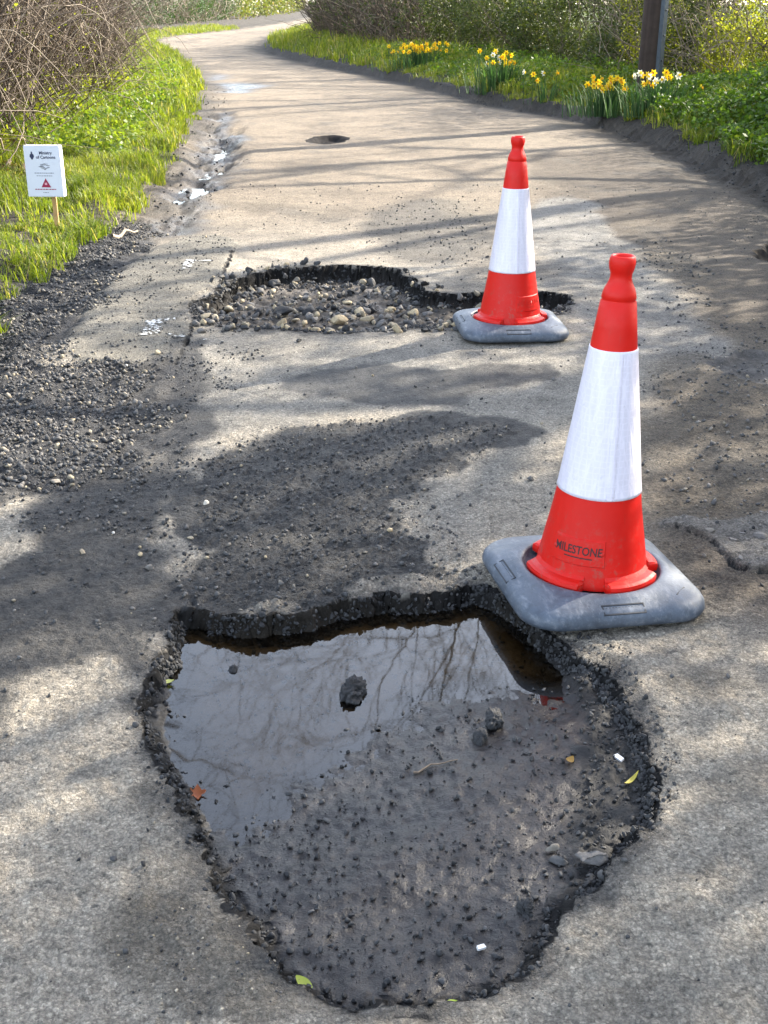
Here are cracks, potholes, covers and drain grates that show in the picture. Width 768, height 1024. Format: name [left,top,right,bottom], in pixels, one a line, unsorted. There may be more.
pothole [305,135,350,144]
crack [217,250,235,288]
pothole [133,584,663,1013]
pothole [187,264,575,335]
